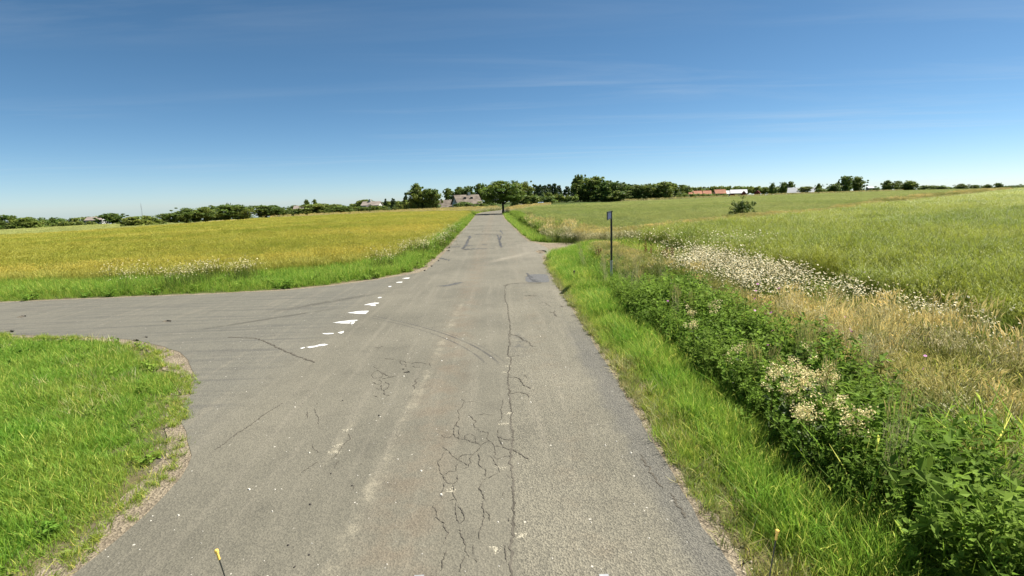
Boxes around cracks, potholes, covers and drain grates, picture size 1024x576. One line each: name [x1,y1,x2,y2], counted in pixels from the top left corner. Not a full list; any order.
crack [372,346,430,397]
crack [640,454,687,518]
